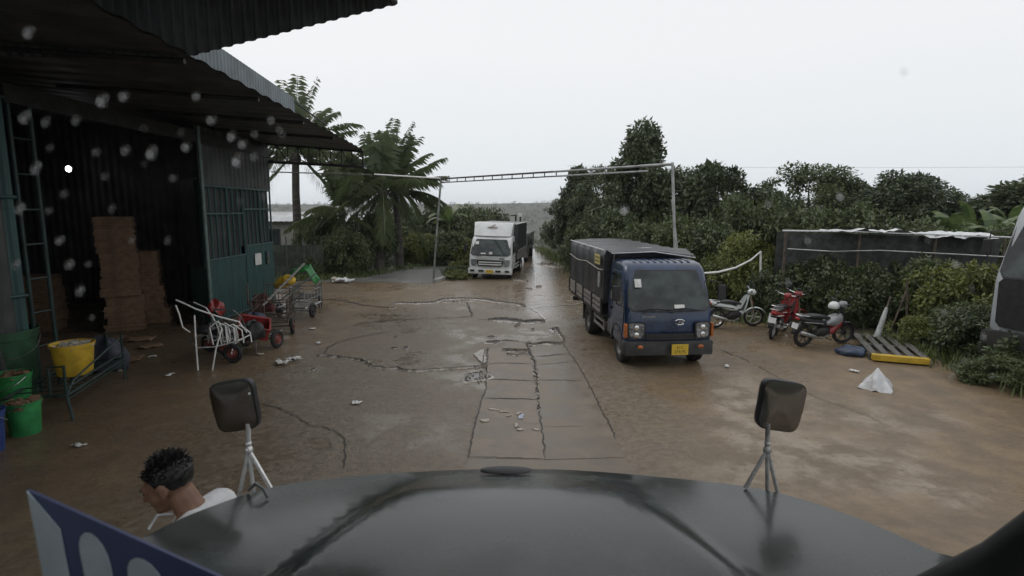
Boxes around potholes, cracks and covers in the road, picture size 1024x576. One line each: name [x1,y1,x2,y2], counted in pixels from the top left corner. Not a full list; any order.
pothole [461,371,494,384]
crack [316,262,568,456]
crack [262,403,347,468]
